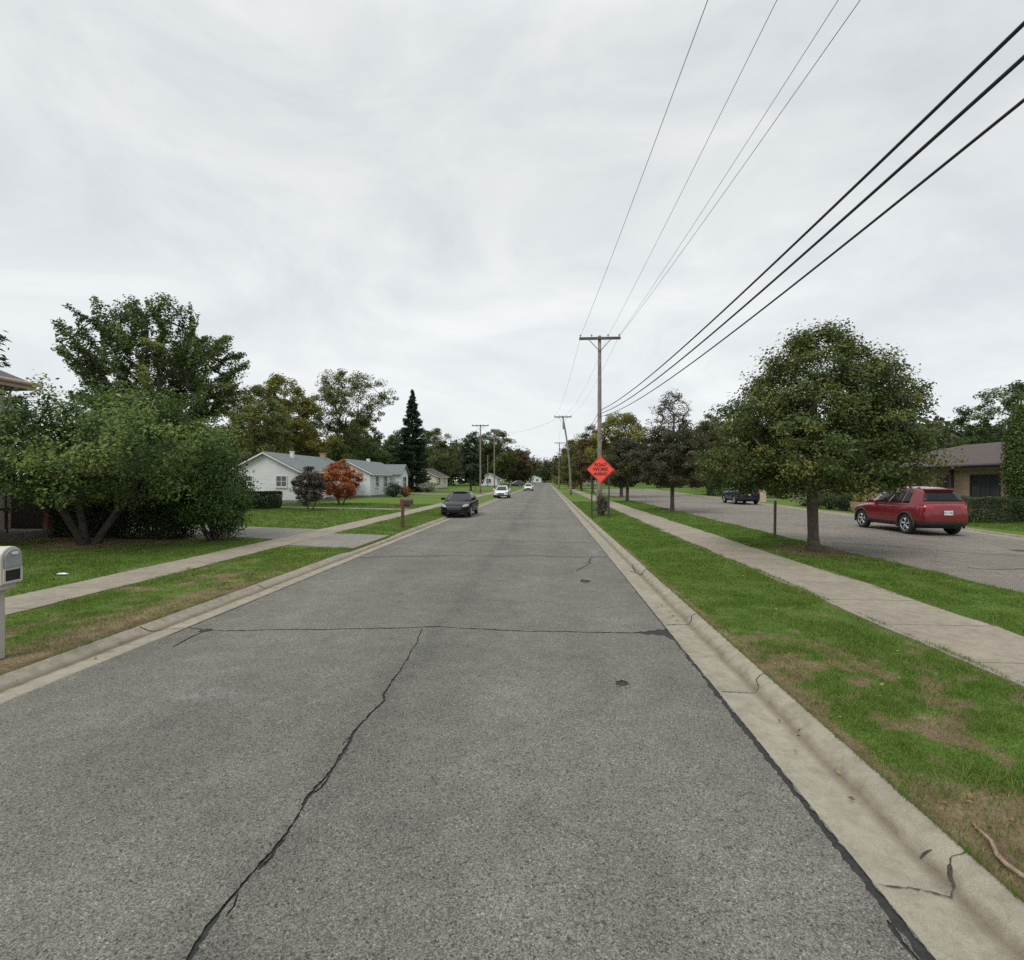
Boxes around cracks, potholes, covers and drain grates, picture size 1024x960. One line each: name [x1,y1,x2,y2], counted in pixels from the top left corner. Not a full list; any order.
crack [173,626,676,960]
